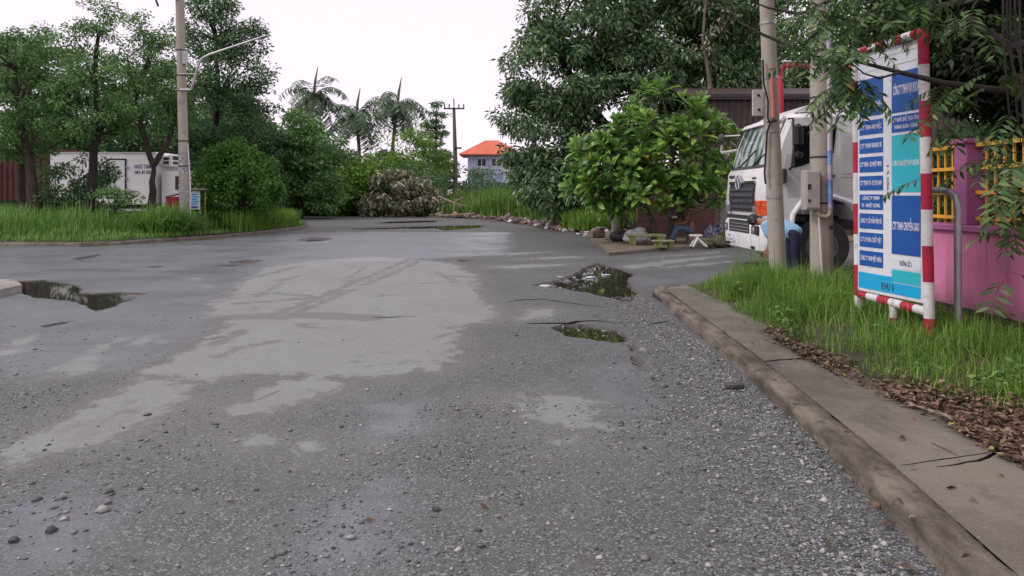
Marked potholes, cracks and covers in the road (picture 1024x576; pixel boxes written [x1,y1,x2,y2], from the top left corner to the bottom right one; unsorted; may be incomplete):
pothole [18,280,148,312]
crack [508,299,612,324]
pothole [551,324,628,342]
crack [930,442,1008,467]
pothole [532,262,639,302]
